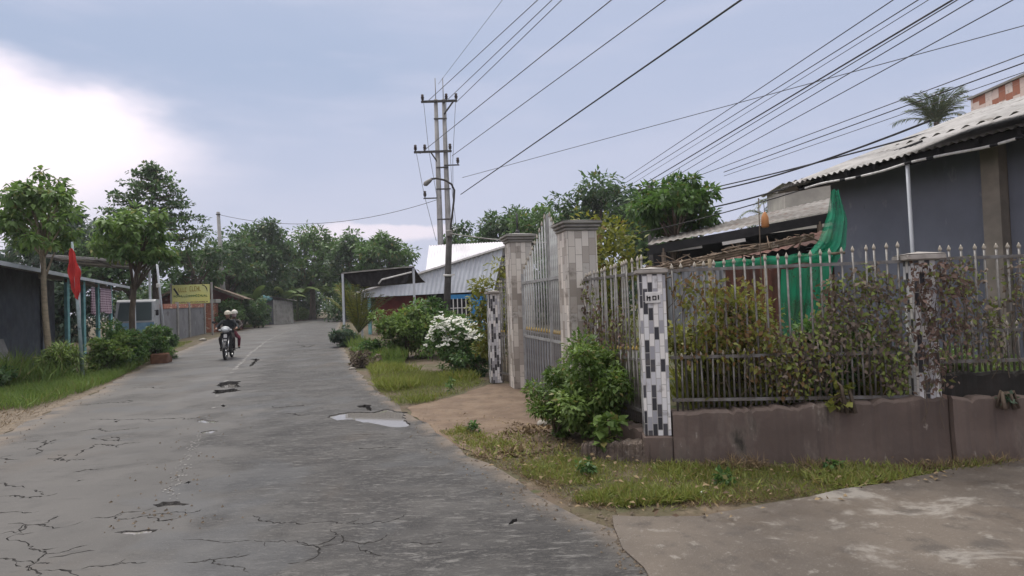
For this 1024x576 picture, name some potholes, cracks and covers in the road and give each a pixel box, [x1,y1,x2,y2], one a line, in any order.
crack [0,483,145,576]
crack [183,513,442,573]
pothole [328,409,410,427]
crack [0,387,201,482]
crack [95,508,202,521]
